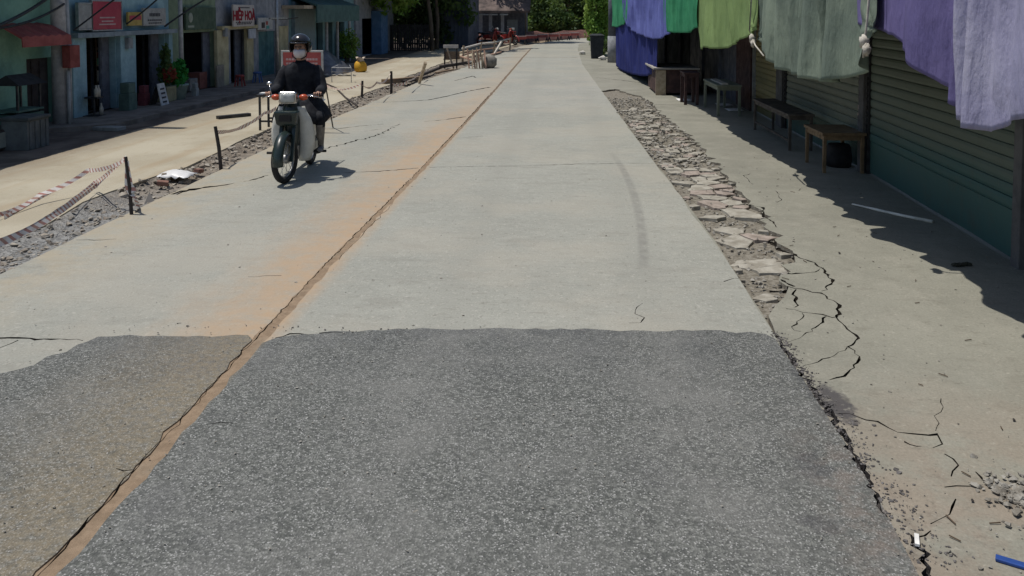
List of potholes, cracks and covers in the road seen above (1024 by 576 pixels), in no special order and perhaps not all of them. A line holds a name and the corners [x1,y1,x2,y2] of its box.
crack [0,49,861,576]
crack [838,399,994,543]
